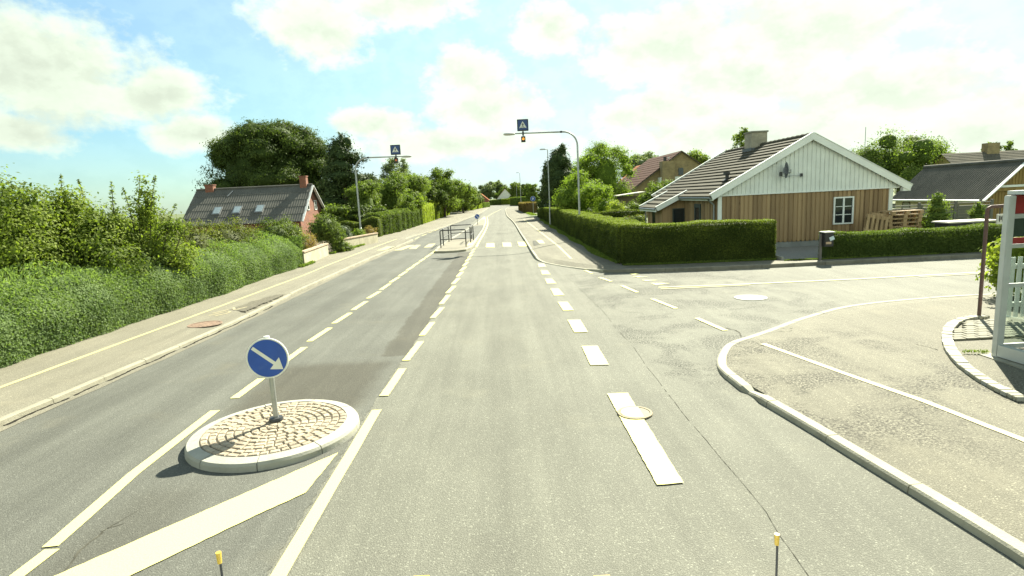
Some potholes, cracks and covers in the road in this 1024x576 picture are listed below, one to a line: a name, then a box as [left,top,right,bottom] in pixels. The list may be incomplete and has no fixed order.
manhole cover [617,406,653,420]
manhole cover [187,320,223,328]
crack [63,512,135,572]
